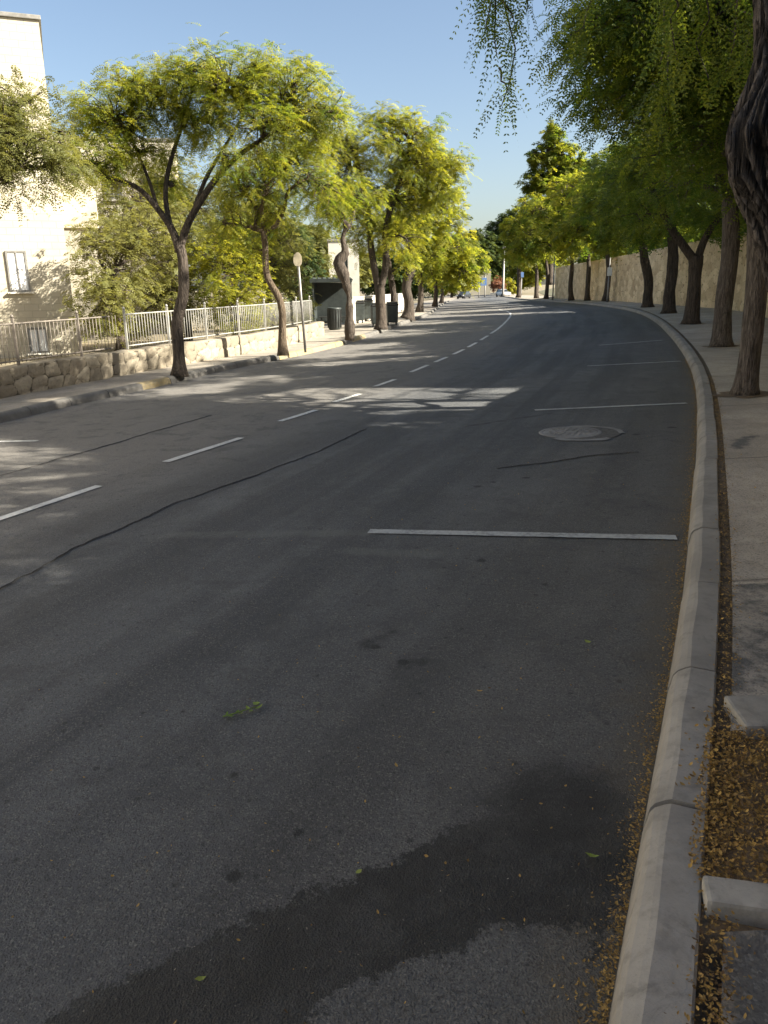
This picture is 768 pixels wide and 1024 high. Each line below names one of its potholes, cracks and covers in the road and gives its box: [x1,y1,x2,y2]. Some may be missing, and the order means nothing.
manhole cover [539,426,625,441]
